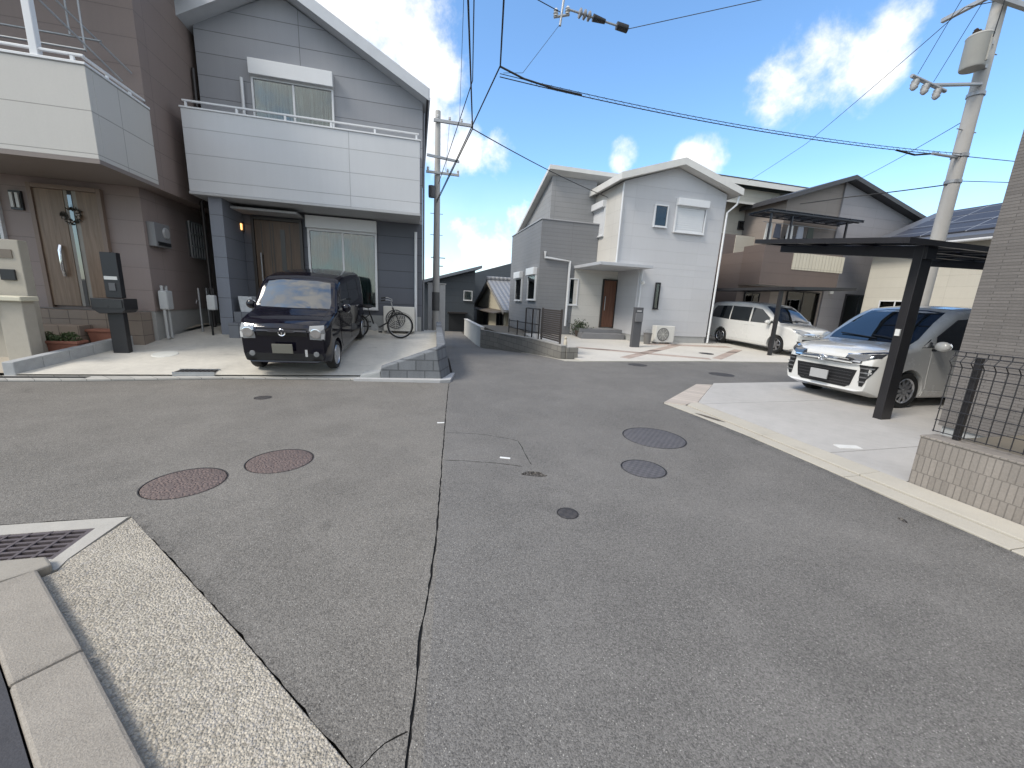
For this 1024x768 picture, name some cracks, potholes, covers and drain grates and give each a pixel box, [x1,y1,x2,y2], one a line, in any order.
manhole cover [244,449,314,474]
utility cover [557,507,579,519]
manhole cover [137,468,229,500]
drain grate [0,516,131,573]
manhole cover [622,428,687,449]
crack [360,732,407,768]
manhole cover [621,460,667,479]
